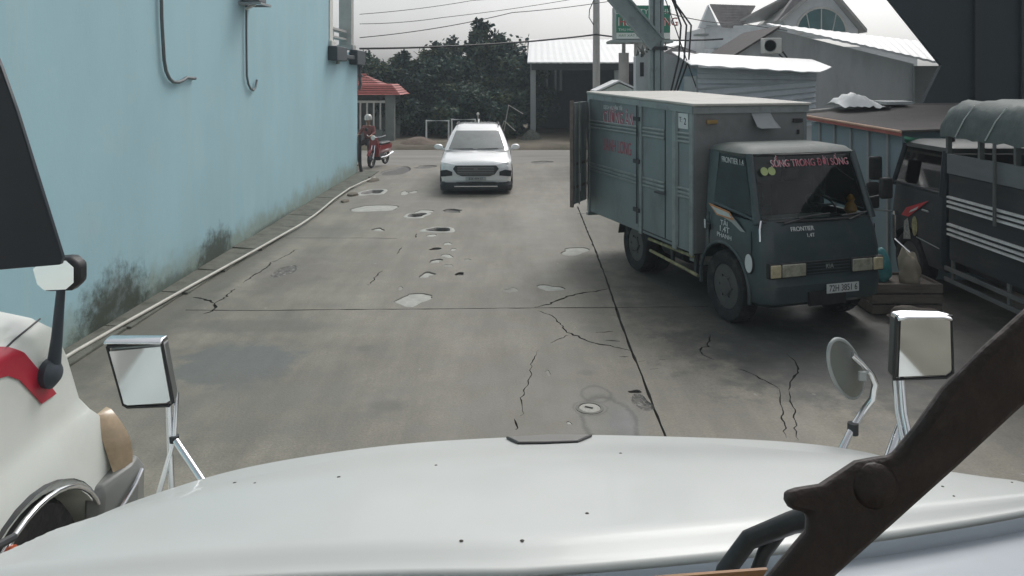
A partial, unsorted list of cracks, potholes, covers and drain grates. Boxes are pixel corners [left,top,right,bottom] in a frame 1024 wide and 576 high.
manhole cover [576,402,604,414]
crack [740,355,799,440]
crack [514,289,632,429]
crack [193,250,294,314]
